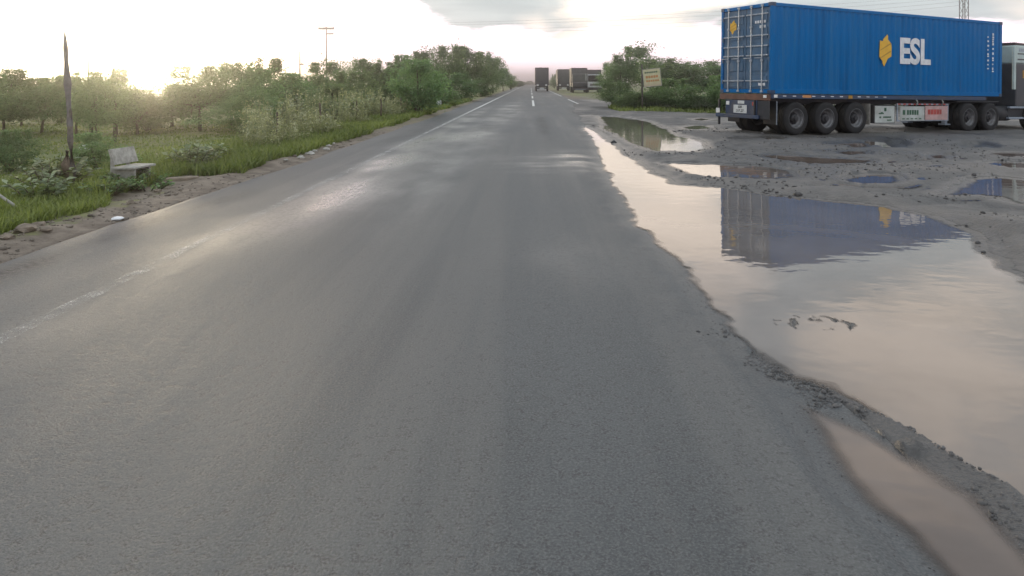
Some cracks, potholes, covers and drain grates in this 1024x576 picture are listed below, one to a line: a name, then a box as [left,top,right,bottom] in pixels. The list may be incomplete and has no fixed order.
pothole [598,116,710,152]
pothole [584,127,1024,520]
pothole [816,414,1024,576]
